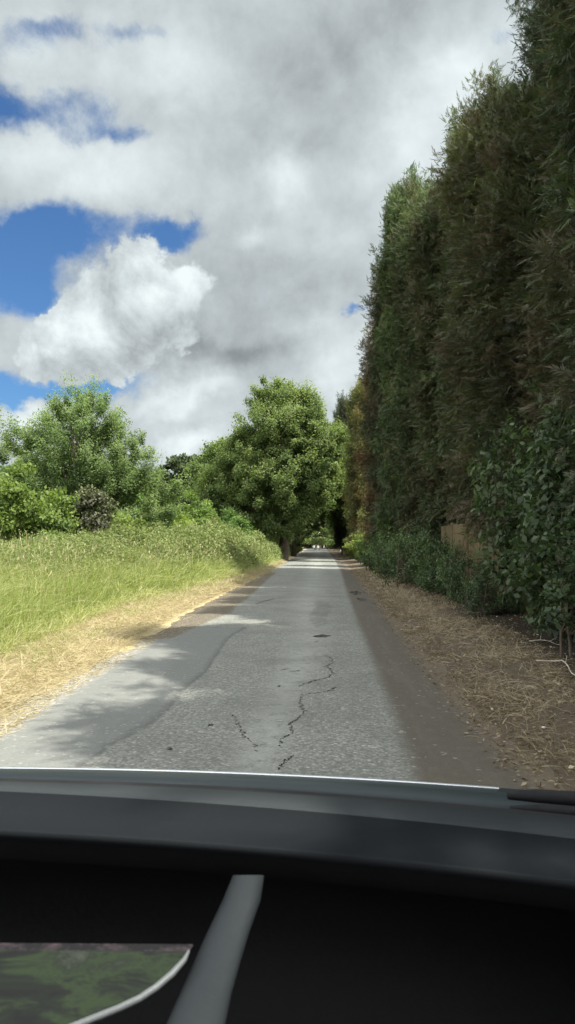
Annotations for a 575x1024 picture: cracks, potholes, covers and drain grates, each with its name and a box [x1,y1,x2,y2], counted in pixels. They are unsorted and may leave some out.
crack [278,640,336,770]
